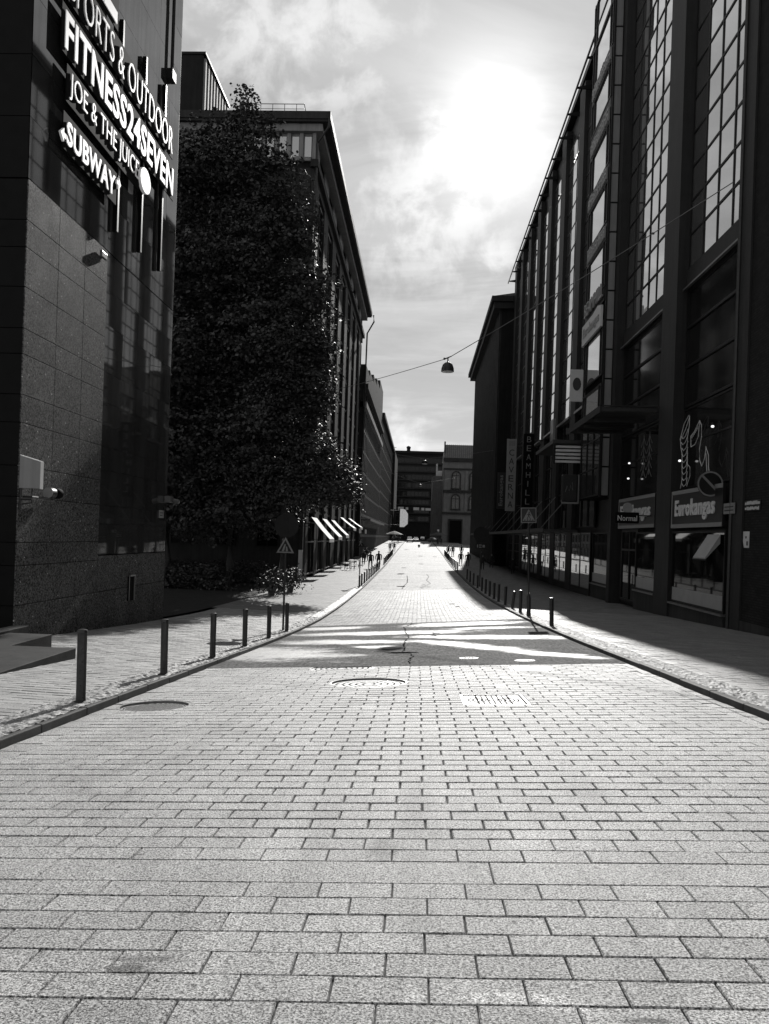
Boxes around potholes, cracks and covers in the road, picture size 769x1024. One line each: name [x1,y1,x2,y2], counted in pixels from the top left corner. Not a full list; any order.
crack [400,624,437,664]
manhole cover [329,678,408,688]
manhole cover [116,700,192,712]
